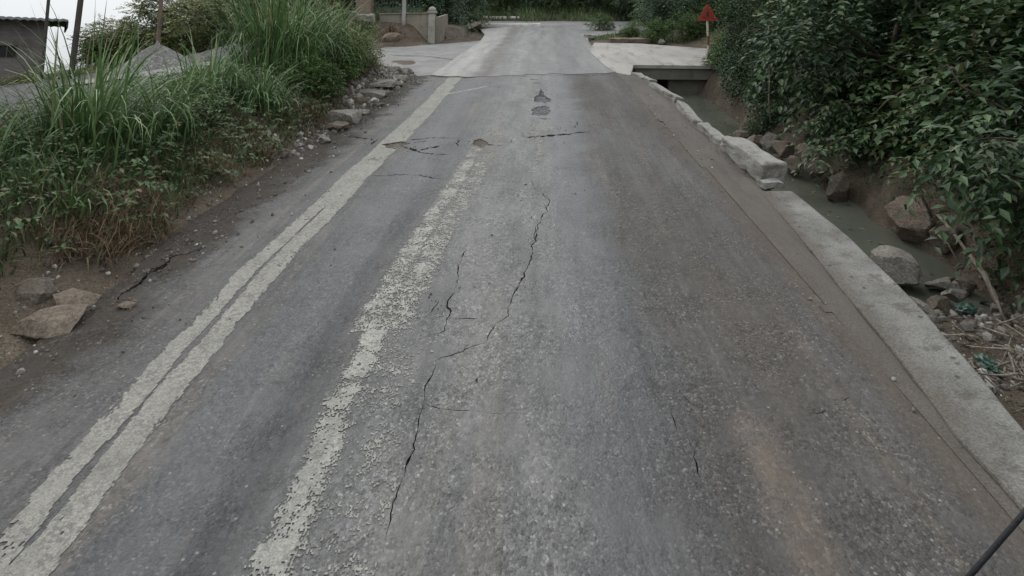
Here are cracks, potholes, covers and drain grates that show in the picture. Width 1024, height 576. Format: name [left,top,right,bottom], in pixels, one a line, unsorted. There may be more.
pothole [534,89,551,103]
crack [379,178,589,567]
pothole [531,106,551,116]
crack [527,118,585,138]
crack [671,391,701,483]
crack [401,137,463,155]
crack [116,240,206,302]
